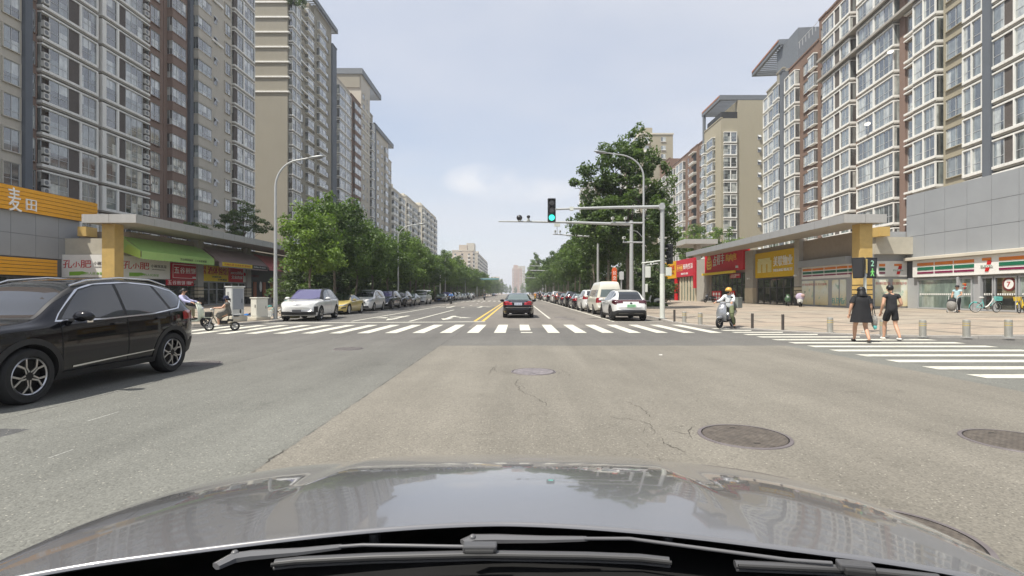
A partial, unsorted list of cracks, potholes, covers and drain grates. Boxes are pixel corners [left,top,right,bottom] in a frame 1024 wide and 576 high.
crack [610,402,692,460]
manhole cover [957,429,1024,453]
manhole cover [697,424,794,450]
